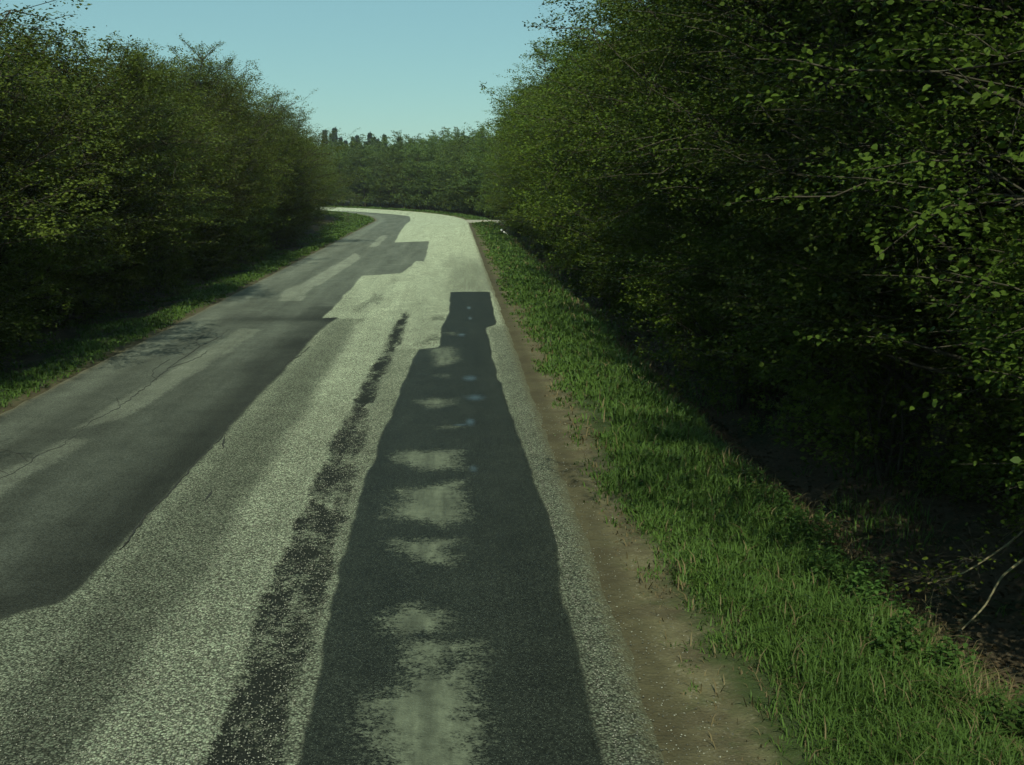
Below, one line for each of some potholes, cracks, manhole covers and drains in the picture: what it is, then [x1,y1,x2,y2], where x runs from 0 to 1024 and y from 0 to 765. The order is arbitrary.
crack [0,328,231,479]
